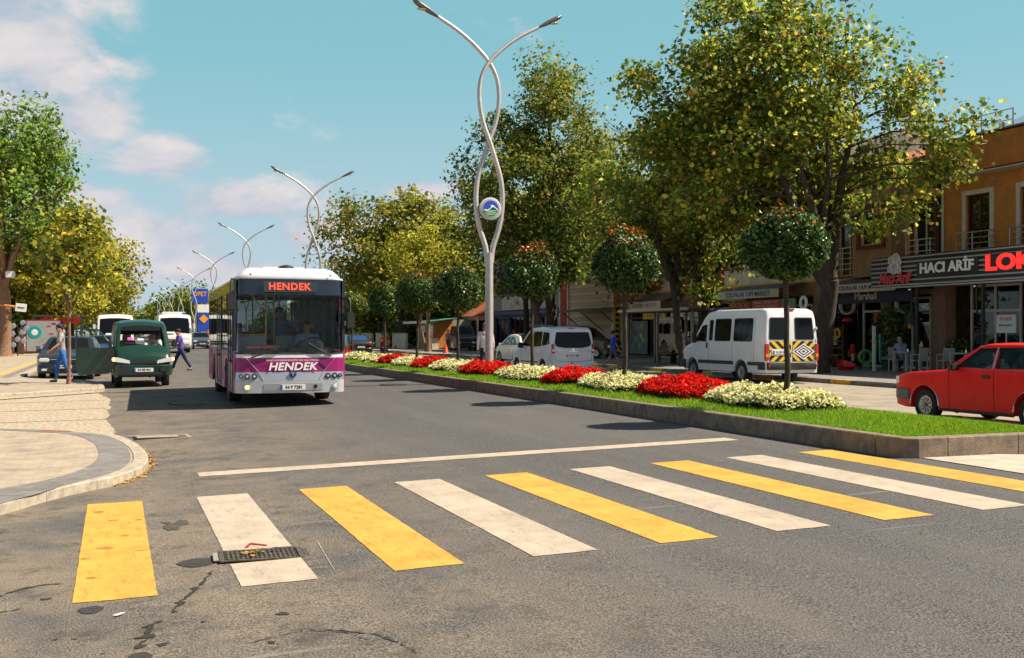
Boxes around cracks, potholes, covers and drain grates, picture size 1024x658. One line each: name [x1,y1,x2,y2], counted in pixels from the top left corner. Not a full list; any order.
crack [139,570,215,646]
drain grate [212,546,310,563]
